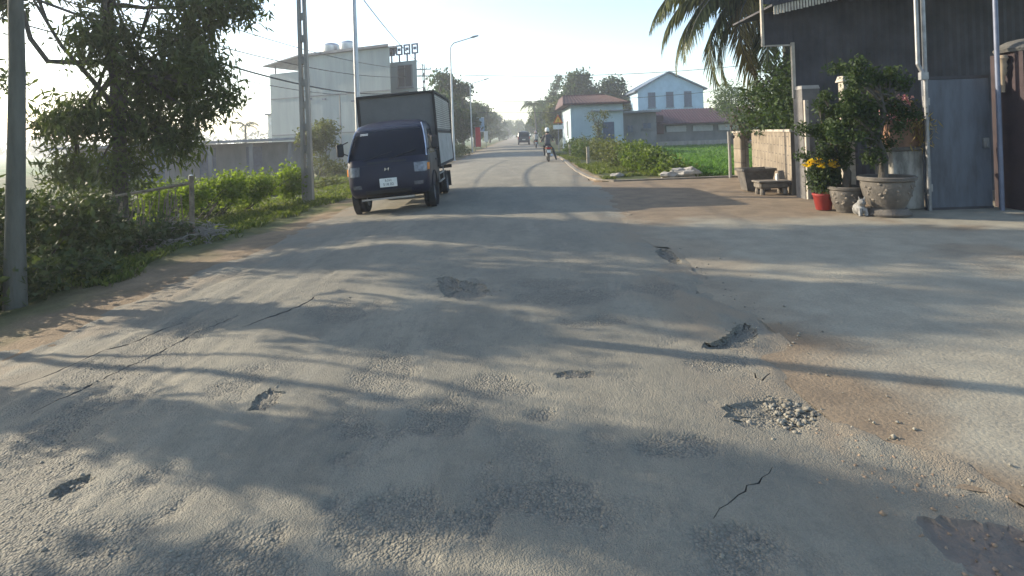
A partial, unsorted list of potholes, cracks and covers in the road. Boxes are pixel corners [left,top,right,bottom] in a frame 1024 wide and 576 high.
pothole [42,473,97,501]
pothole [652,249,683,265]
pothole [435,275,501,301]
crack [713,468,772,519]
pothole [714,397,832,440]
pothole [878,506,1024,576]
crack [5,296,315,414]
pothole [553,370,595,379]
pothole [247,381,285,414]
pothole [701,321,760,350]
